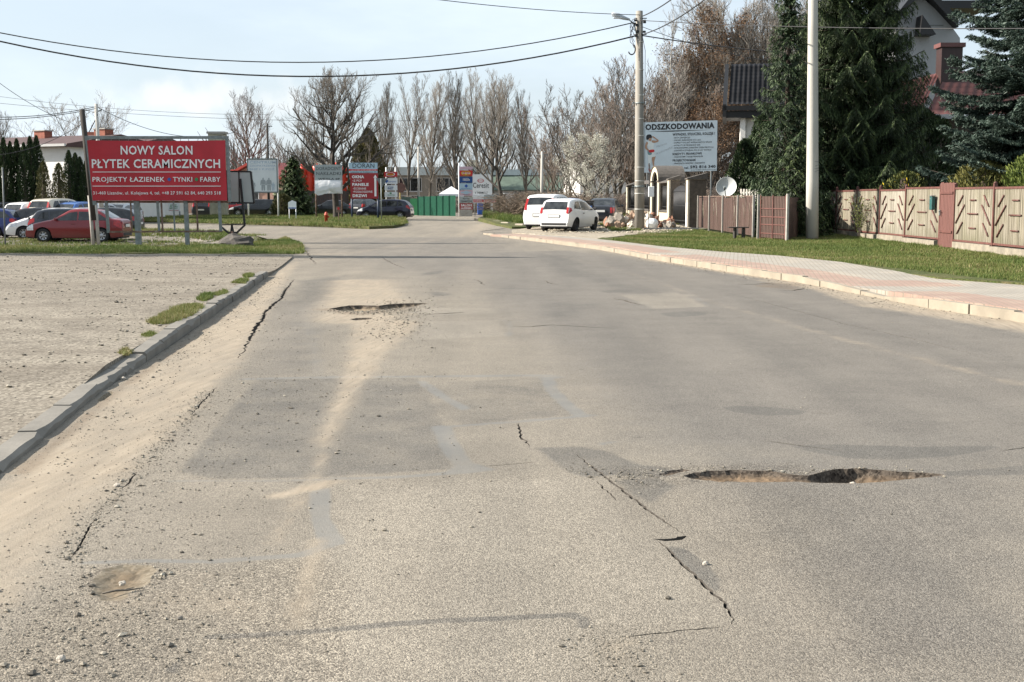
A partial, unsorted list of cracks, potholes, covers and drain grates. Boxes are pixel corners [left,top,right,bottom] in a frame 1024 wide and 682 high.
crack [491,424,531,466]
pothole [684,468,942,483]
crack [576,454,734,638]
pothole [330,303,425,311]
crack [238,280,294,357]
